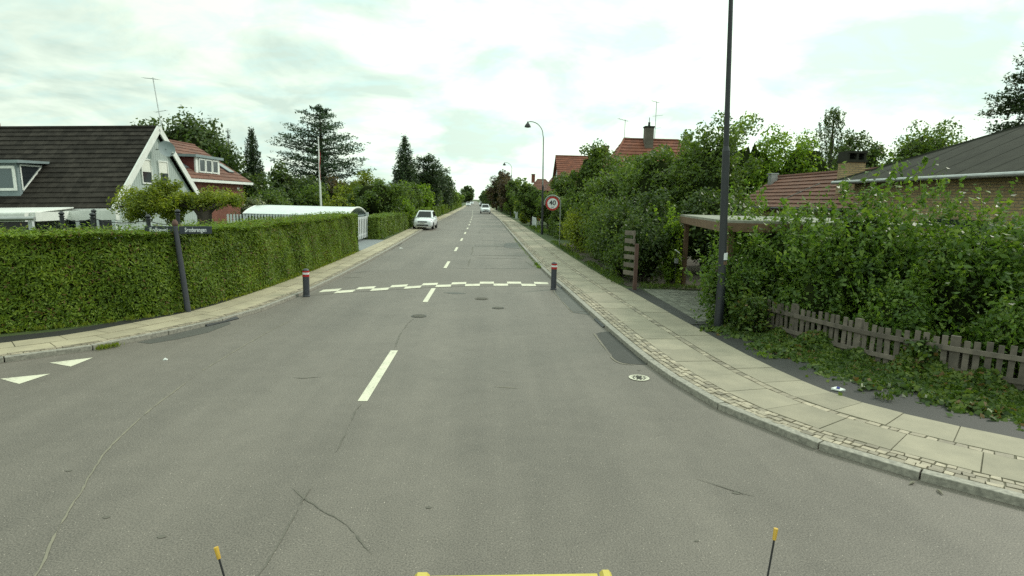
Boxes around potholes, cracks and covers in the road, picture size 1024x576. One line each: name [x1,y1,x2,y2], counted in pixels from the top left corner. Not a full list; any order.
crack [256,487,371,576]
